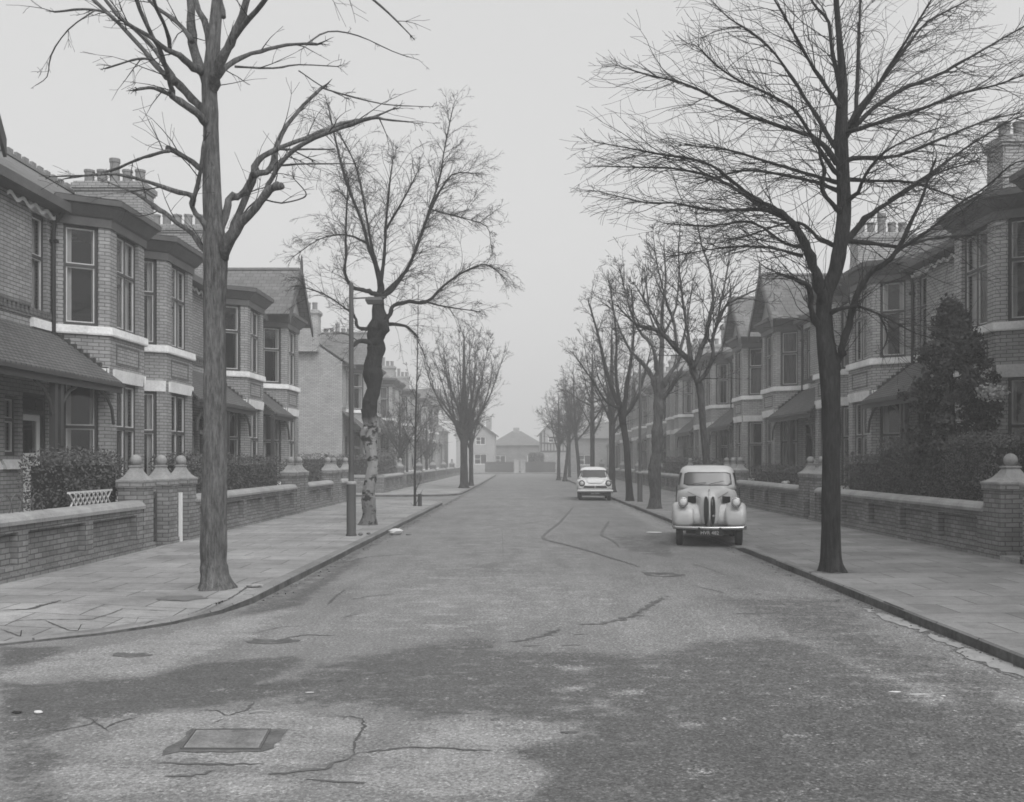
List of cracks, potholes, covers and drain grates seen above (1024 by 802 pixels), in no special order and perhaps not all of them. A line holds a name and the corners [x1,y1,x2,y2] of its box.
crack [508,596,672,646]
manhole cover [180,728,271,750]
crack [213,702,255,723]
crack [46,717,136,732]
crack [159,762,261,777]
